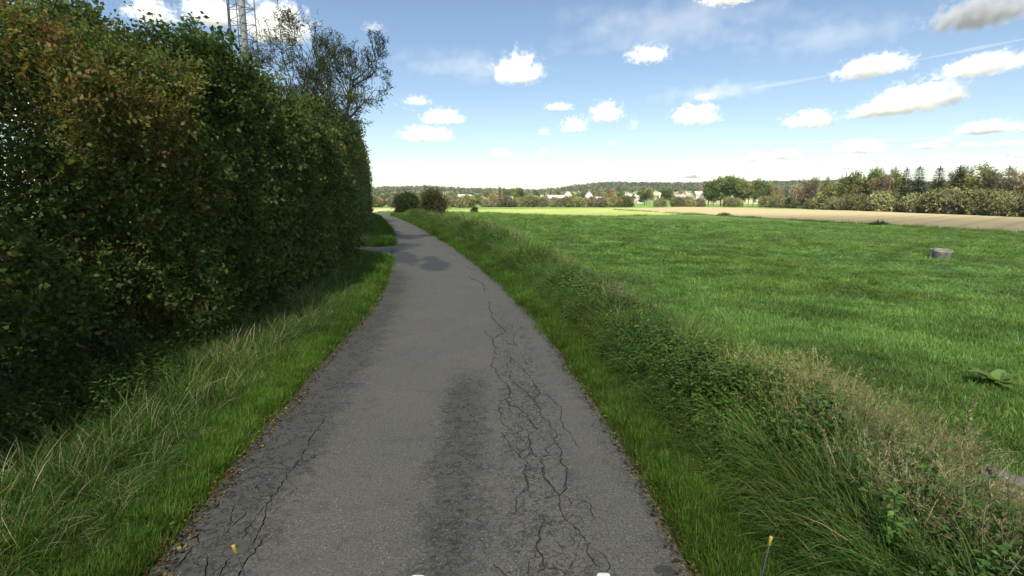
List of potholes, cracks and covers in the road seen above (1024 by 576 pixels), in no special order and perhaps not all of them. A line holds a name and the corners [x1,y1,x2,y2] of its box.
crack [453,254,630,576]
crack [173,419,325,576]
